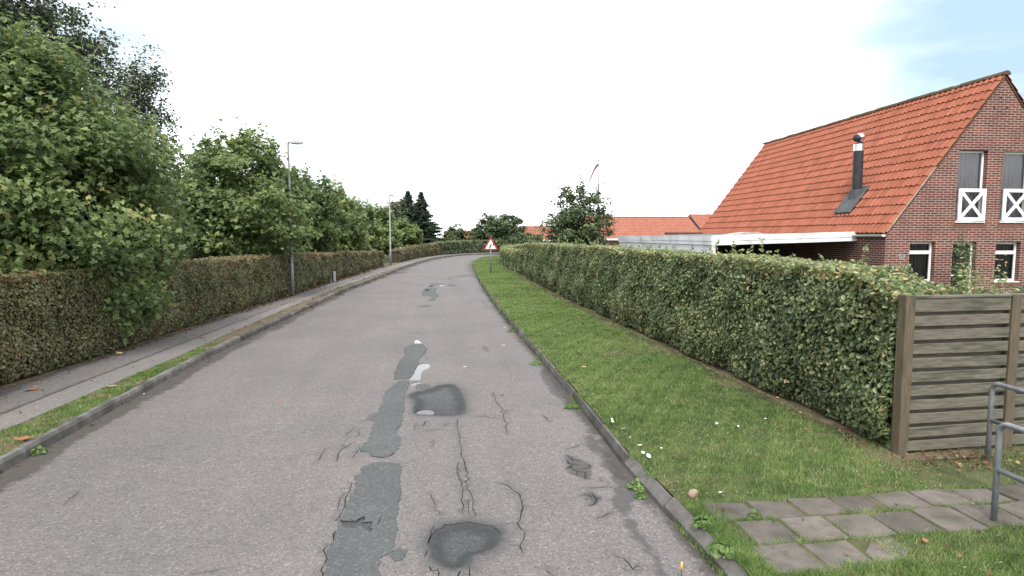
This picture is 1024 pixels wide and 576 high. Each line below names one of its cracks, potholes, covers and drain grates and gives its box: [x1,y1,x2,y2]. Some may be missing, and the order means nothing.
crack [414,419,476,517]
crack [497,483,531,553]
pothole [429,521,500,569]
crack [321,484,352,575]
pothole [410,384,465,415]
